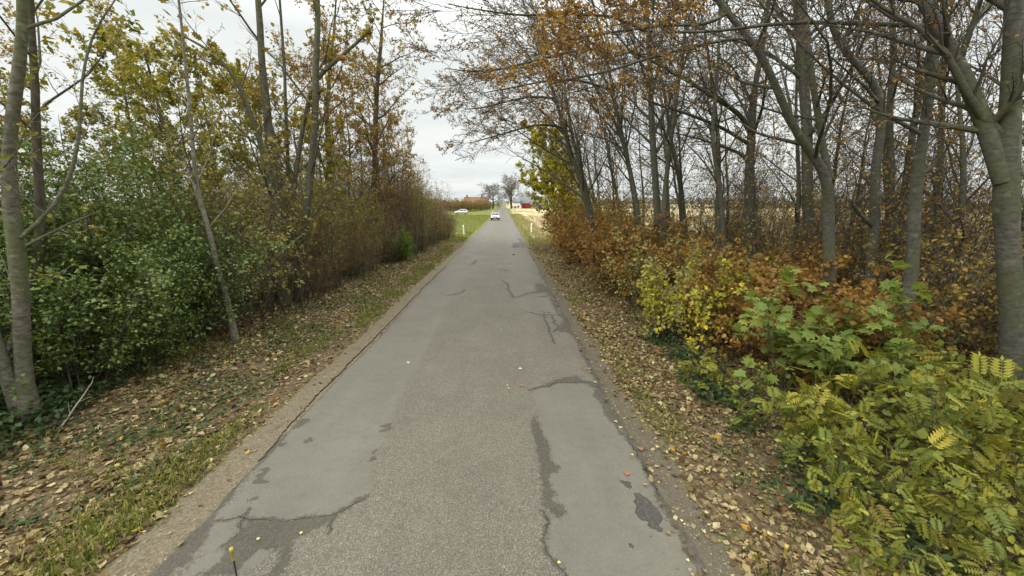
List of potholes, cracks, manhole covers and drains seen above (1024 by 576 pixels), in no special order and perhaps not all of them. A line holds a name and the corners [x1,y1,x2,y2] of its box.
crack [217,496,367,546]
